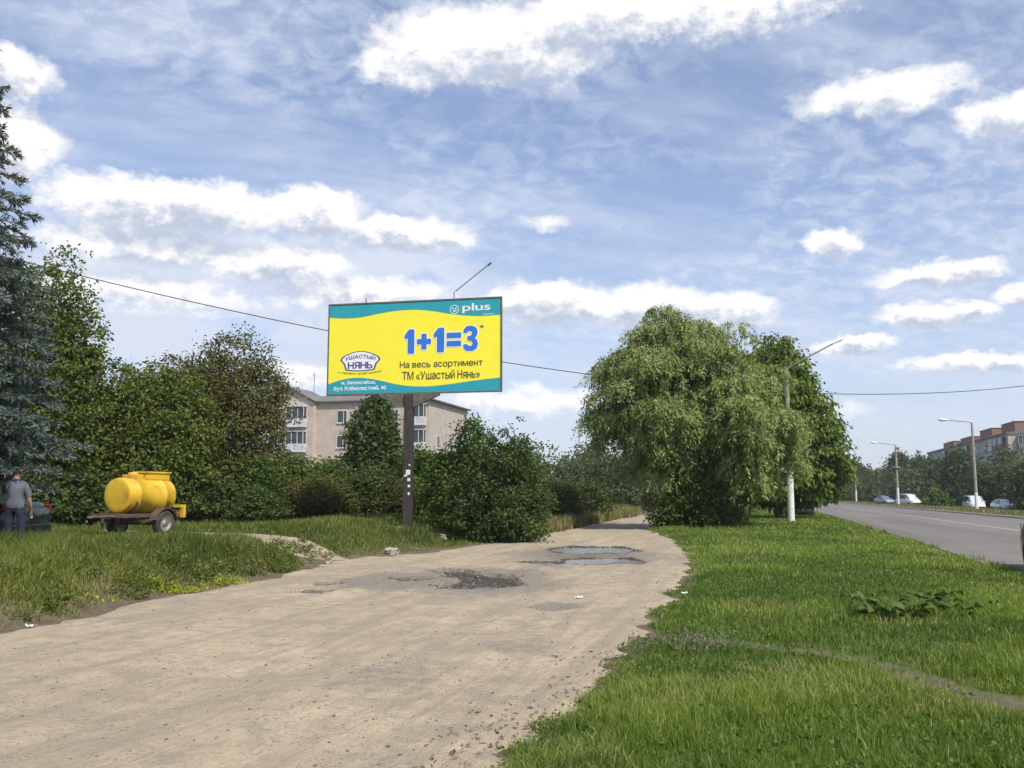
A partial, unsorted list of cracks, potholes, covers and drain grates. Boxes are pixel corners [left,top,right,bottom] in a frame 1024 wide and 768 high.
pothole [429,568,525,590]
pothole [543,545,642,555]
pothole [516,557,648,565]
